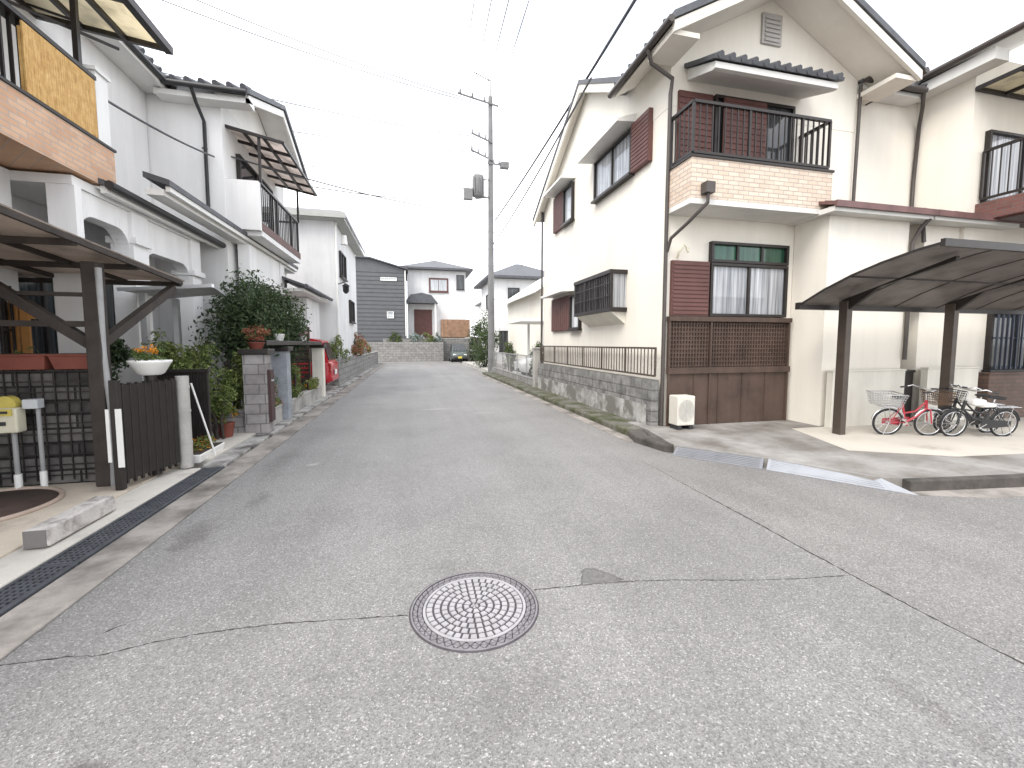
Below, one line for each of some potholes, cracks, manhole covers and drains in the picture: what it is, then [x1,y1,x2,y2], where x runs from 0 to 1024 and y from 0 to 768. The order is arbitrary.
crack [0,615,408,666]
drain grate [39,509,159,566]
manhole cover [409,571,539,653]
drain grate [130,477,208,512]
drain grate [0,562,79,617]
drain grate [185,466,225,479]
